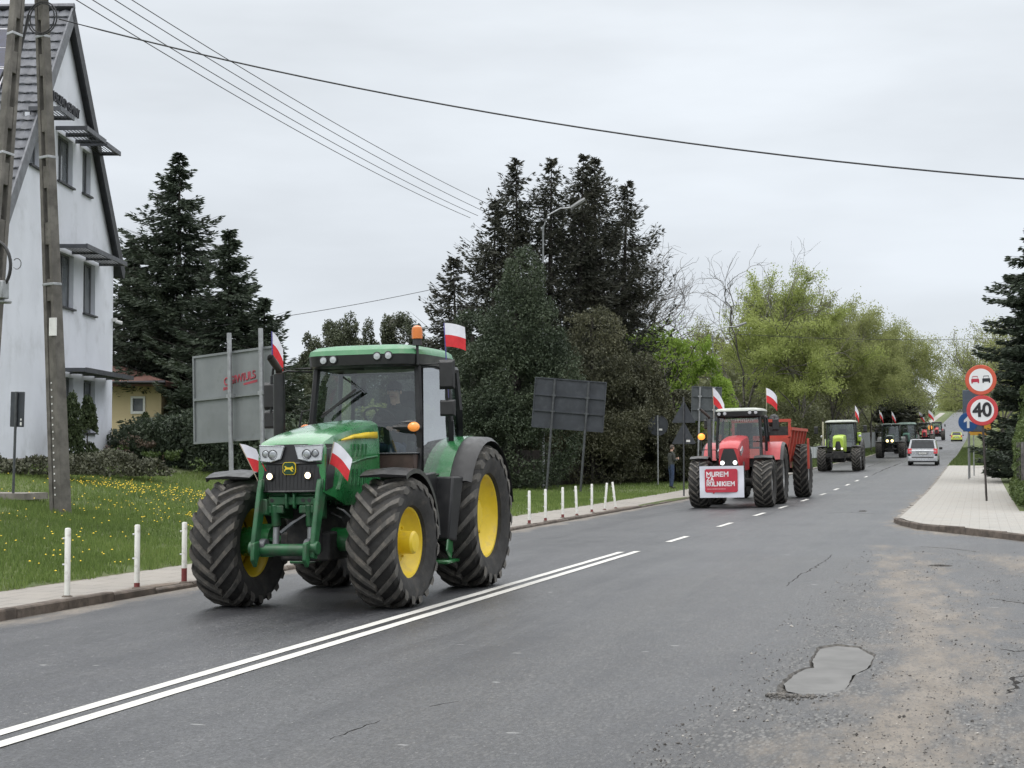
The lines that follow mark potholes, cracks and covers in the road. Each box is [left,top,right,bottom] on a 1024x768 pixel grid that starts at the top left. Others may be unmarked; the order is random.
crack [1006,676,1024,694]
pothole [765,644,876,701]
